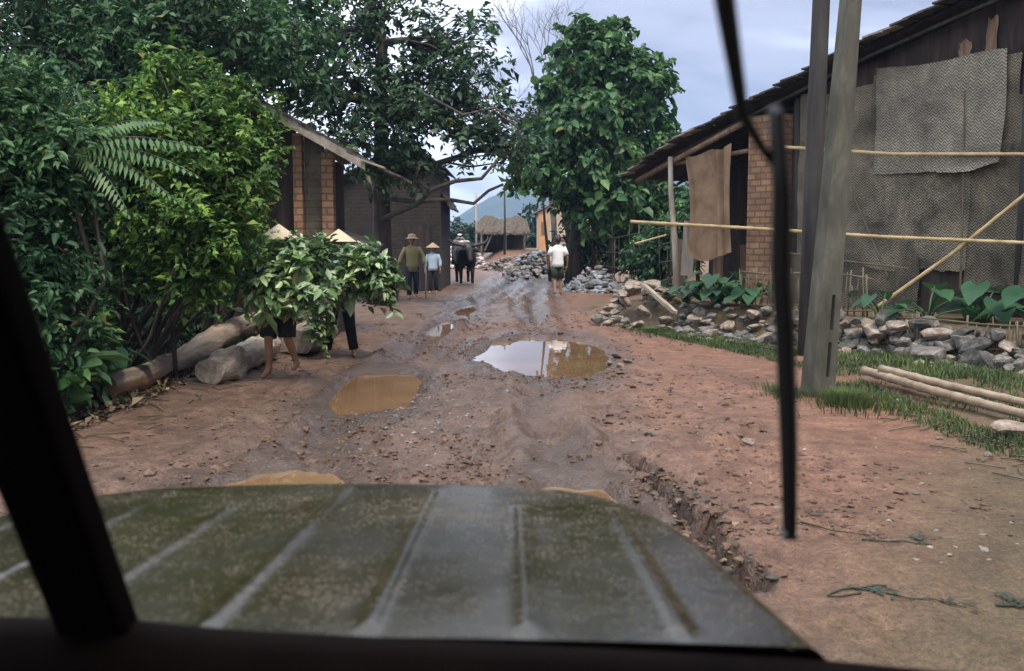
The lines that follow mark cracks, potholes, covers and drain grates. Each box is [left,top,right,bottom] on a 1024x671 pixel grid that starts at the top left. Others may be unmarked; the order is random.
pothole [447,328,636,391]
pothole [418,317,460,346]
pothole [445,301,483,319]
pothole [303,362,442,426]
